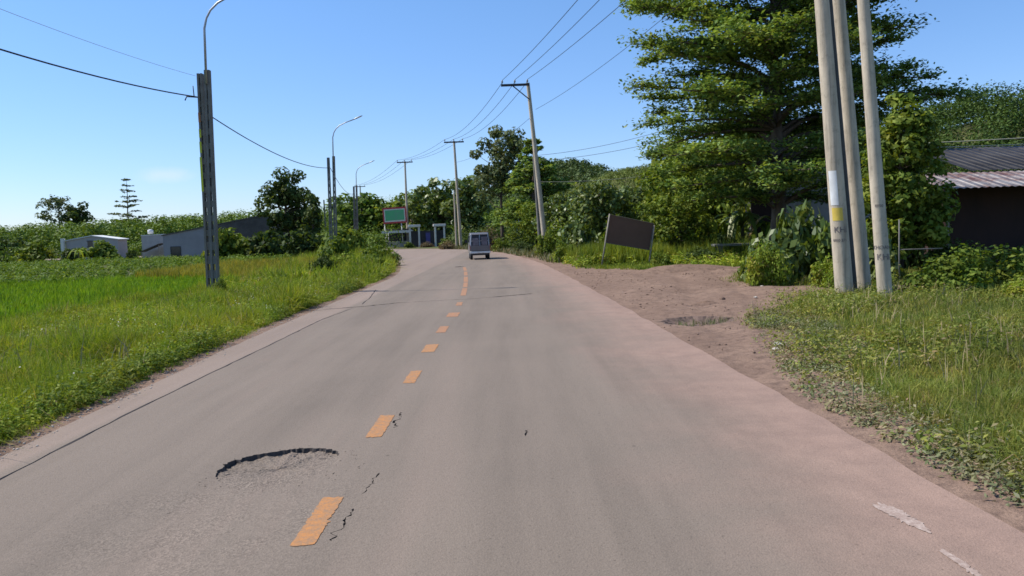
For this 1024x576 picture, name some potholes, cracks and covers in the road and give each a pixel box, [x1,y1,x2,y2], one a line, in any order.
pothole [215,448,340,490]
crack [329,473,380,541]
